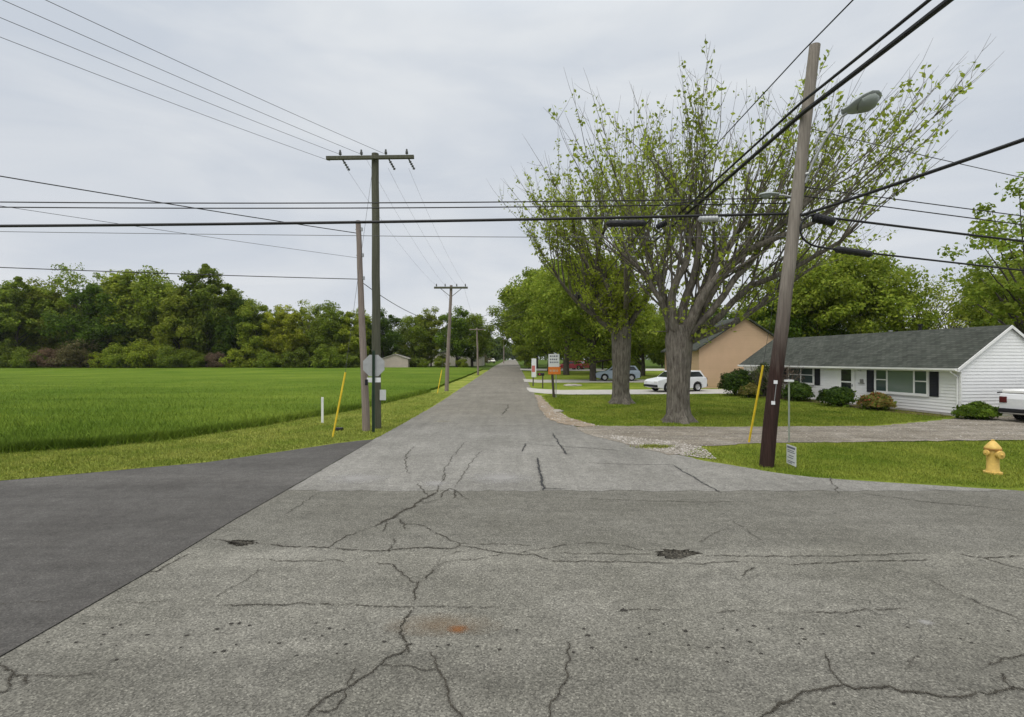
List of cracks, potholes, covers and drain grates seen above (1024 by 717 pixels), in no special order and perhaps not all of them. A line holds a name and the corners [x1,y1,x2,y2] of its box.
crack [683,522,905,575]
pothole [656,549,703,559]
crack [218,443,672,717]
crack [1,665,103,692]
crack [760,654,1024,717]
